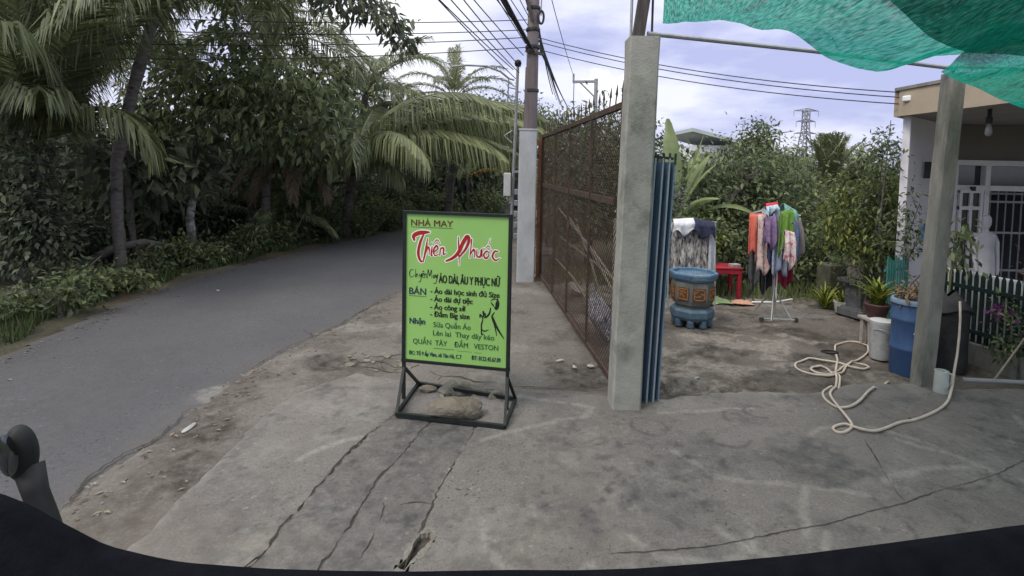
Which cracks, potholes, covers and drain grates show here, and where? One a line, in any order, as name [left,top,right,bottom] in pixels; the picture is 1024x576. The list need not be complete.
pothole [393,527,437,571]
crack [244,415,431,570]
crack [400,427,475,570]
